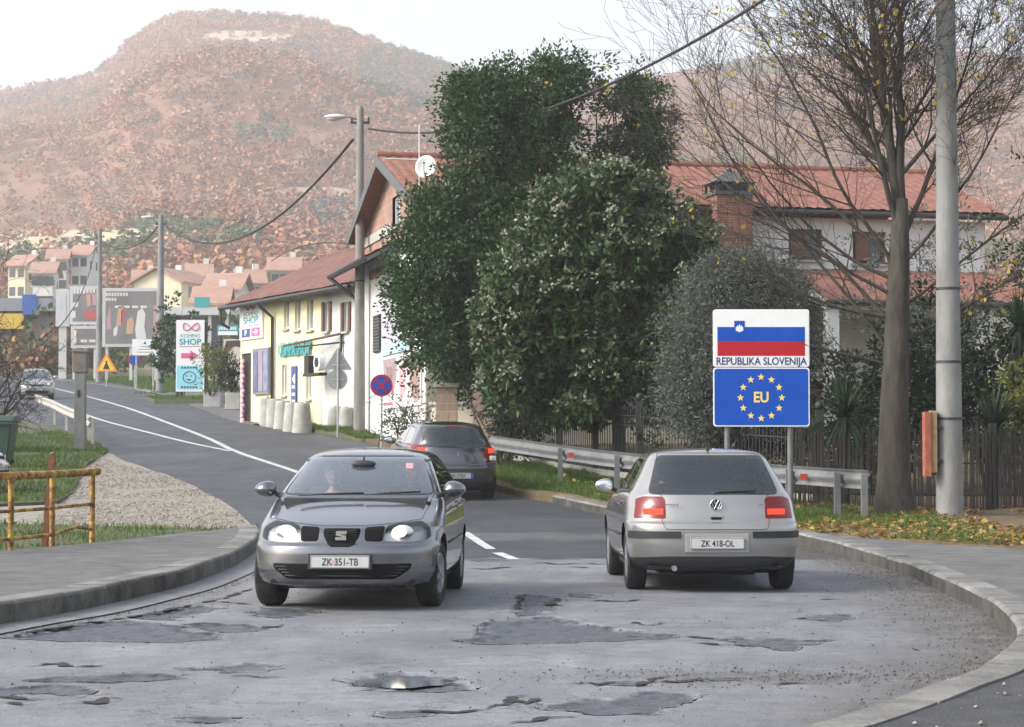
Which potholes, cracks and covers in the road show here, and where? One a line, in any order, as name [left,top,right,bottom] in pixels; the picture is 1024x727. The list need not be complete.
pothole [0,619,224,643]
pothole [176,661,284,674]
pothole [26,673,189,683]
pothole [119,605,230,621]
pothole [179,622,273,633]
pothole [805,613,856,622]
pothole [334,671,480,693]
pothole [506,594,566,616]
pothole [453,616,679,645]
pothole [719,636,836,651]
pothole [536,690,704,716]
pothole [0,684,98,697]
